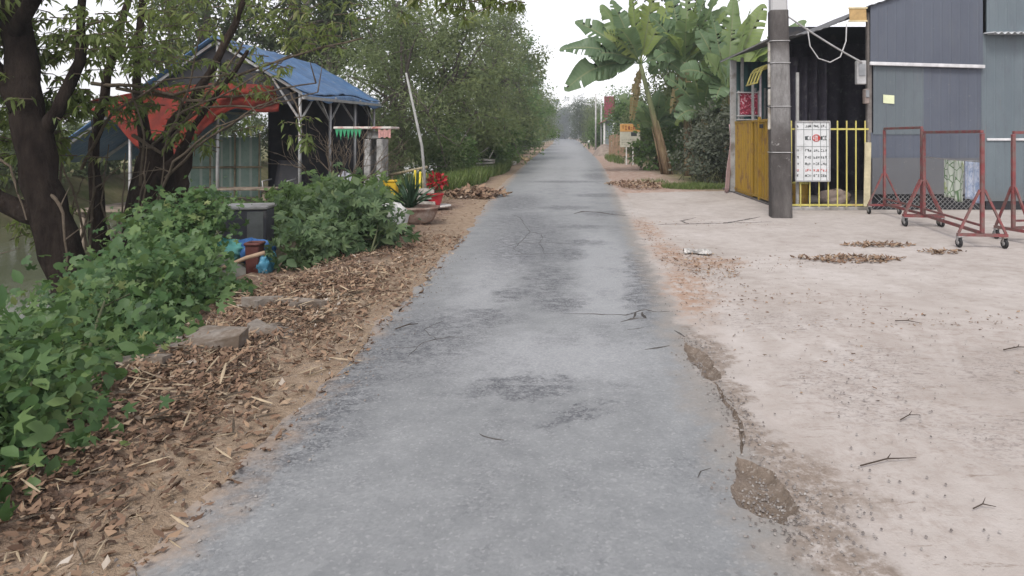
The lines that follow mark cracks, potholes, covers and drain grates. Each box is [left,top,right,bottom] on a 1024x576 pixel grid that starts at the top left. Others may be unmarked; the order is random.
pothole [684,338,722,381]
crack [660,217,758,225]
crack [697,382,746,478]
crack [513,215,566,254]
pothole [730,457,800,525]
crack [587,309,668,330]
